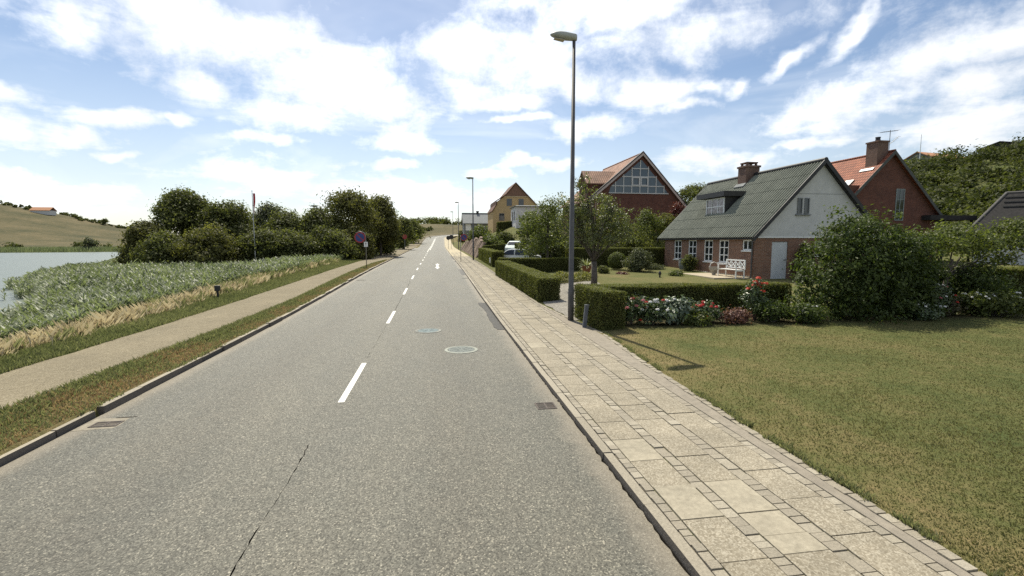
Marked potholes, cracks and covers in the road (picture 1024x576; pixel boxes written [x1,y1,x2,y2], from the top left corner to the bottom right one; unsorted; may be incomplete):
crack [230,445,308,576]
drain grate [71,416,137,432]
manhole cover [444,346,478,354]
drain grate [534,402,557,410]
